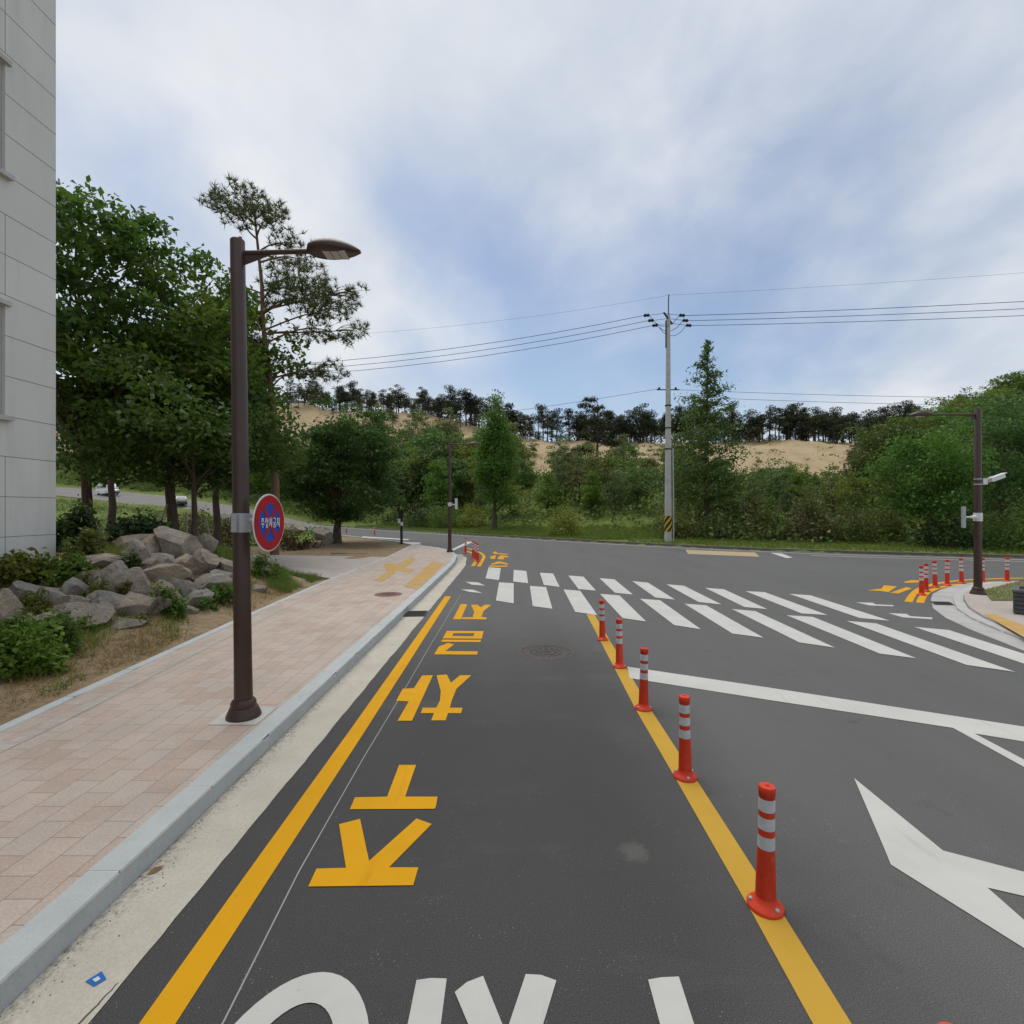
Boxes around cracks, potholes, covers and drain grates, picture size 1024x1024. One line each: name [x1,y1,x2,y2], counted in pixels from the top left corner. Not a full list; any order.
manhole cover [517,644,576,661]
